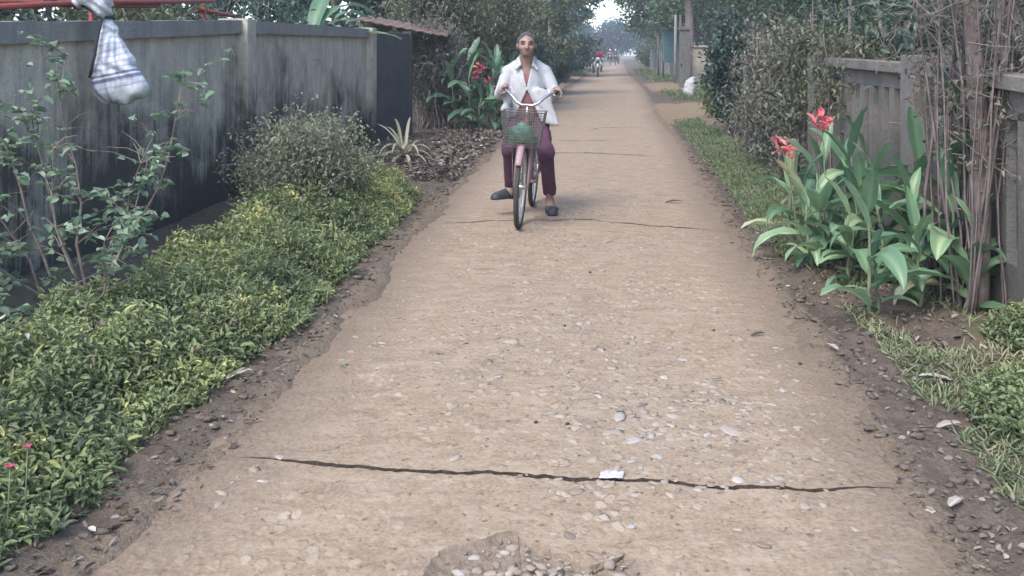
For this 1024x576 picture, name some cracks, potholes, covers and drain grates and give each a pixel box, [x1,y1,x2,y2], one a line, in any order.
pothole [423,530,642,576]
